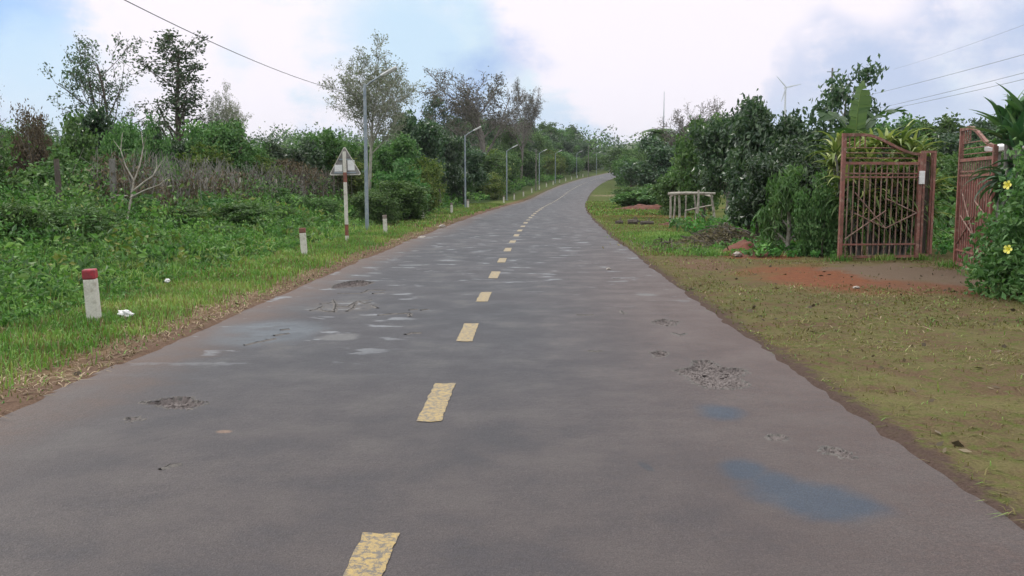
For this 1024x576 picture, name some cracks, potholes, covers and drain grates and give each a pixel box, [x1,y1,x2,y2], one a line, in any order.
pothole [650,319,683,327]
pothole [648,350,671,358]
pothole [137,396,210,411]
crack [310,290,430,335]
pothole [814,445,859,460]
crack [244,328,290,346]
pothole [764,433,791,442]
pothole [331,280,375,289]
pothole [671,359,755,391]
